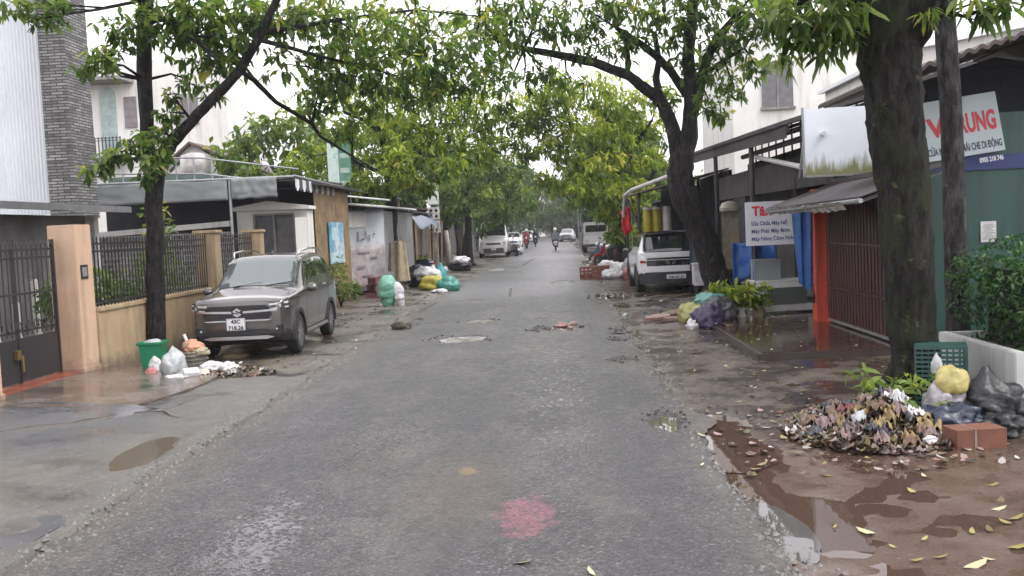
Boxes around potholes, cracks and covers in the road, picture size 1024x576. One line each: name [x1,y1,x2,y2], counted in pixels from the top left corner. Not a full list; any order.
pothole [630,407,717,437]
pothole [520,324,561,333]
pothole [600,355,655,365]
